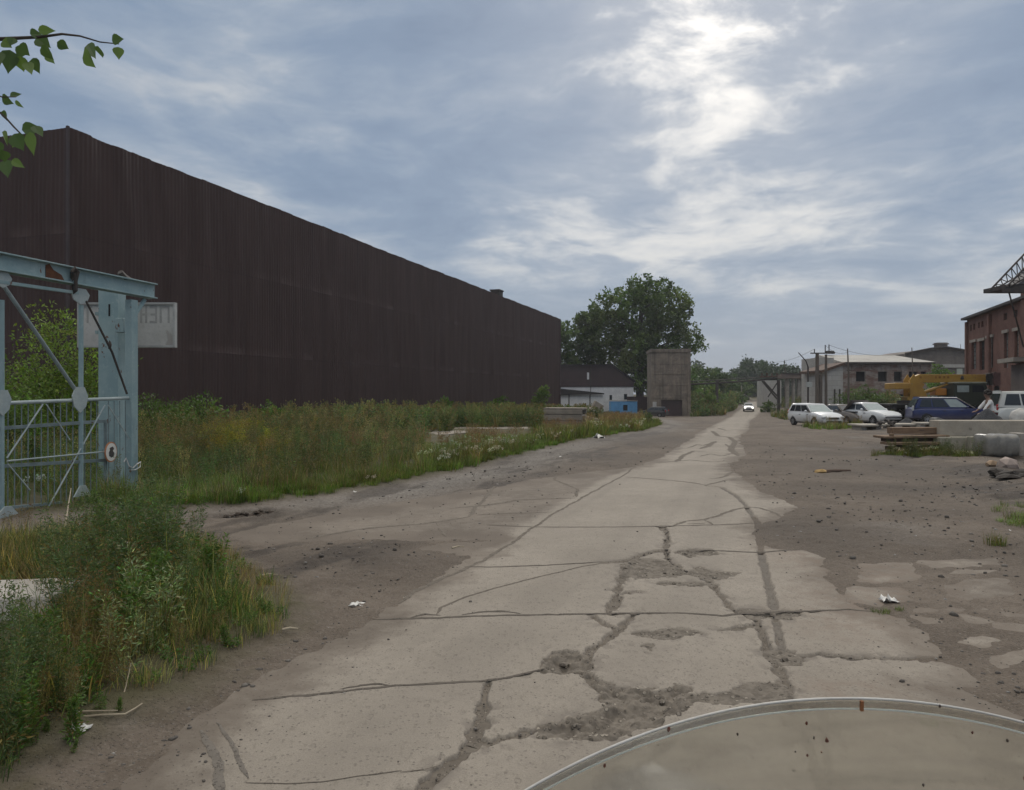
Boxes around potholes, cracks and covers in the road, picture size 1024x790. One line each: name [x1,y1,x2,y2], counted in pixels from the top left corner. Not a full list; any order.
pothole [631,628,703,640]
crack [301,476,579,540]
crack [246,685,534,790]
pothole [539,652,593,679]
pothole [223,509,274,518]
crack [436,428,790,687]
